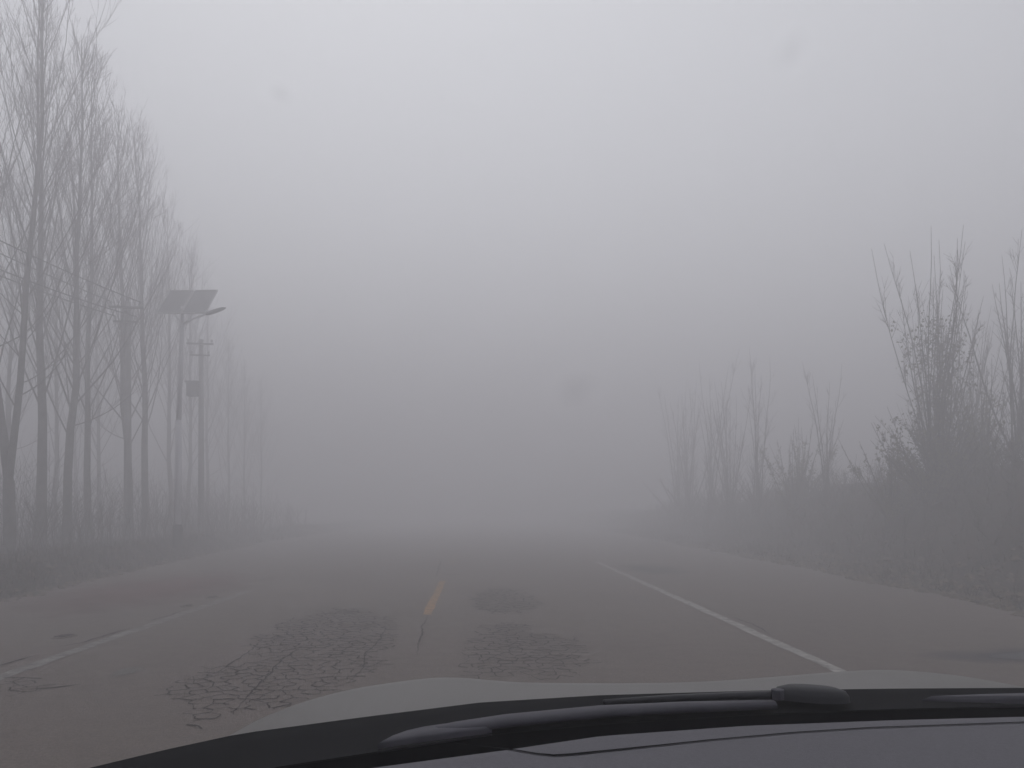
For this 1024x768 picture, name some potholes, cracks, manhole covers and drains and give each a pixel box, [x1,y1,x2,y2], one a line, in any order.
crack [154,607,399,729]
crack [416,615,428,655]
crack [458,588,601,680]
crack [0,655,78,696]
